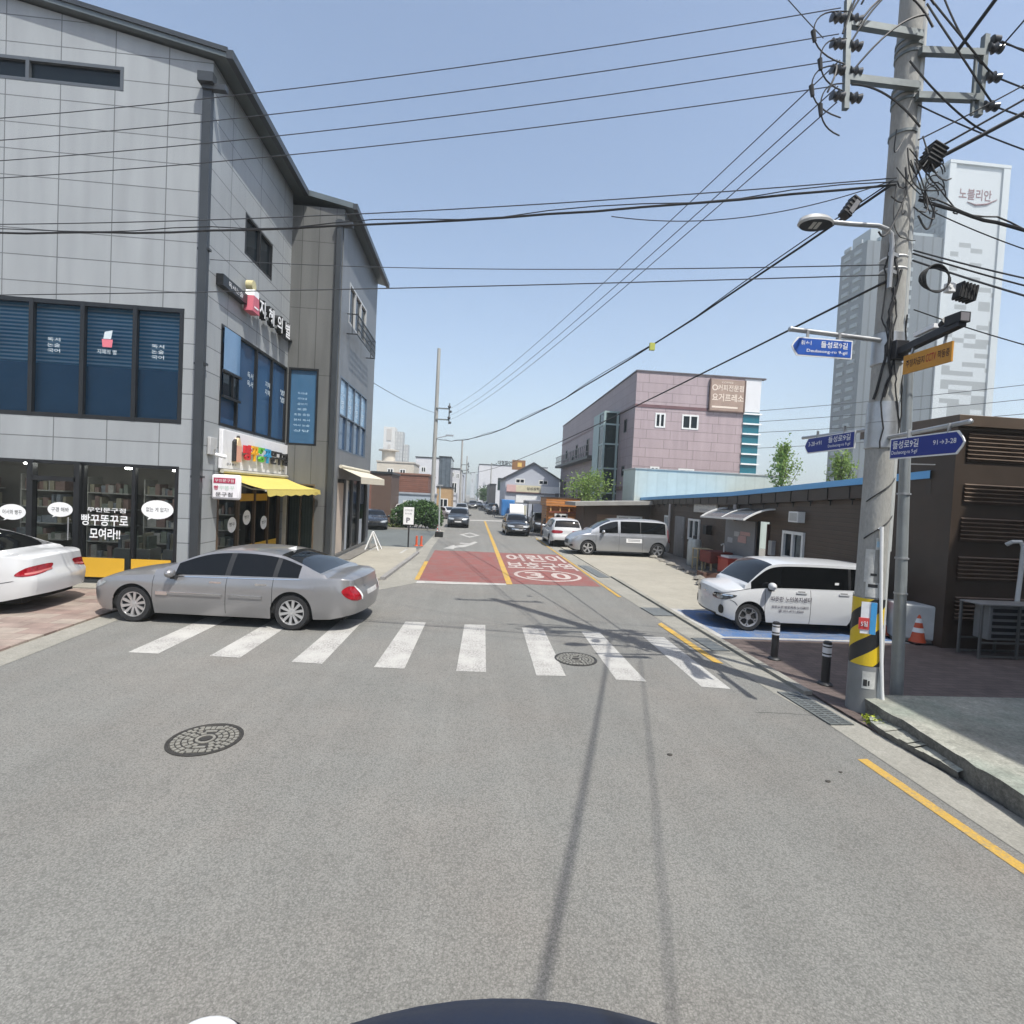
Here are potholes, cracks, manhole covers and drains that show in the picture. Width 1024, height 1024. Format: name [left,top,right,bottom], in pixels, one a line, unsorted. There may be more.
manhole cover [164,723,244,757]
manhole cover [554,652,597,666]
